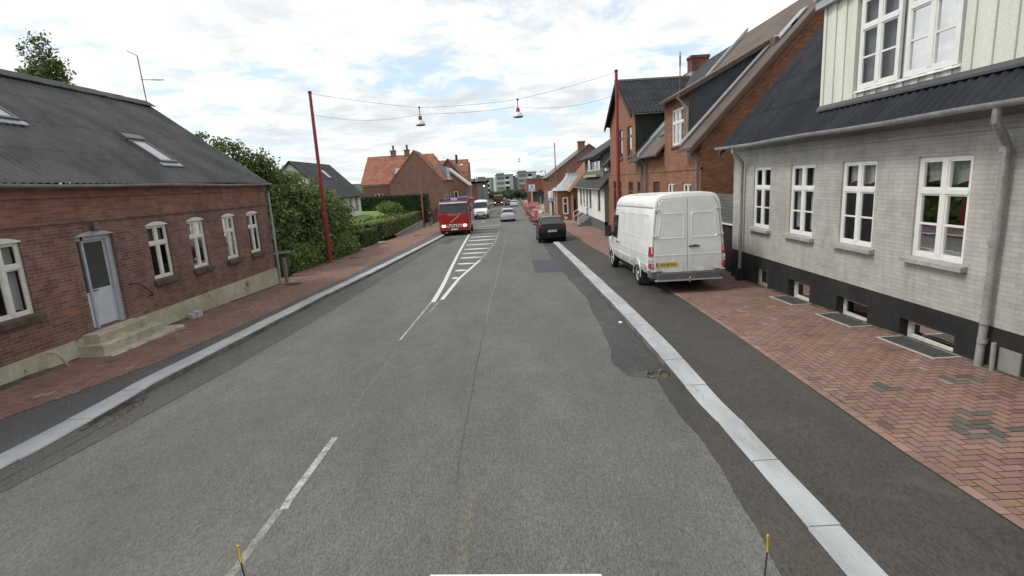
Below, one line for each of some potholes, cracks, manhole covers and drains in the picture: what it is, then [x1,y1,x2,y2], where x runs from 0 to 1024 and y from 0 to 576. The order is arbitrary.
drain grate [770,295,809,305]
drain grate [876,335,961,359]
drain grate [816,312,872,328]
pothole [645,369,672,380]
pothole [73,397,146,436]
